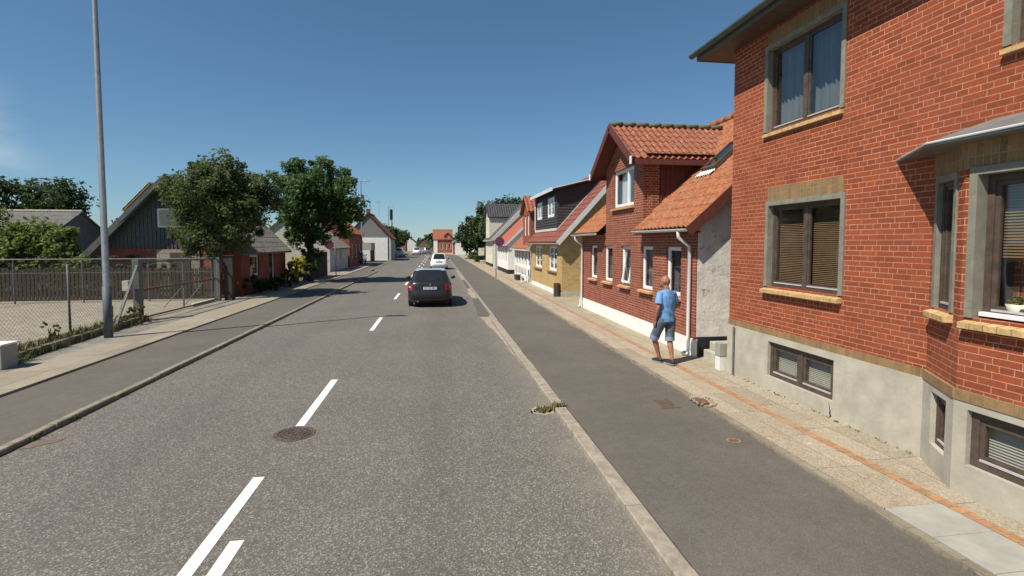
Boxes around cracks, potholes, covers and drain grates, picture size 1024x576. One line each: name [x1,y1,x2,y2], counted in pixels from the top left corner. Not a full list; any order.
manhole cover [652,399,681,409]
manhole cover [18,437,65,450]
manhole cover [273,426,316,441]
